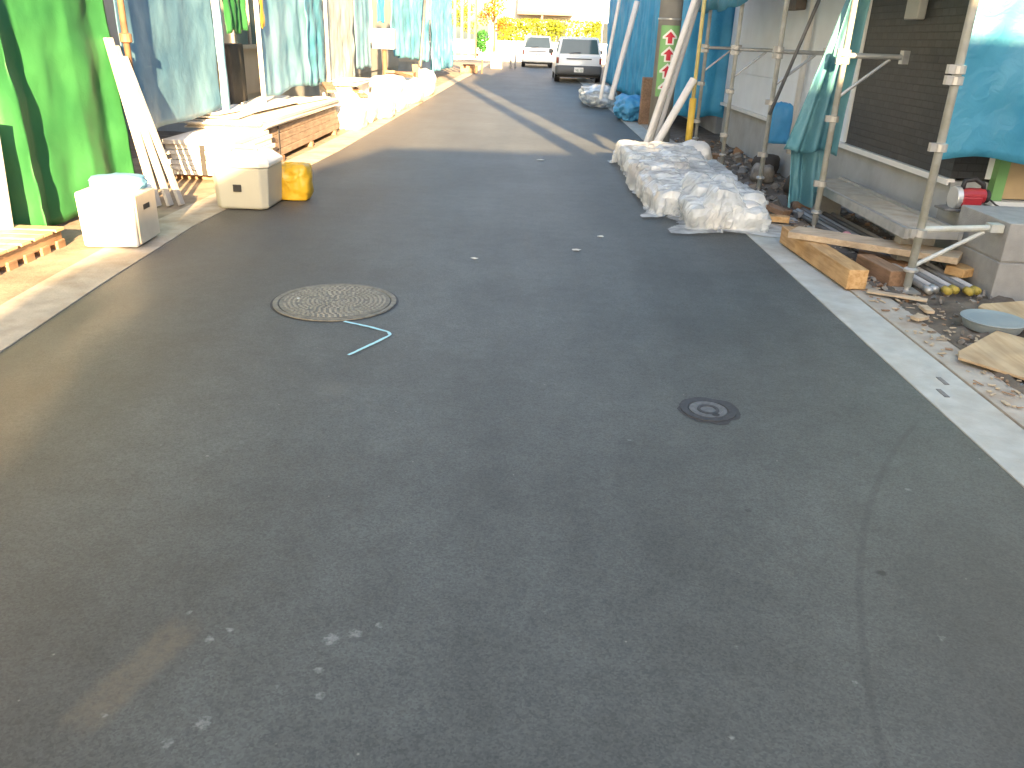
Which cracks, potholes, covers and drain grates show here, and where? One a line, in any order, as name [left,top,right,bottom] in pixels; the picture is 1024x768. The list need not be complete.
manhole cover [270,284,399,322]
manhole cover [677,397,741,425]
